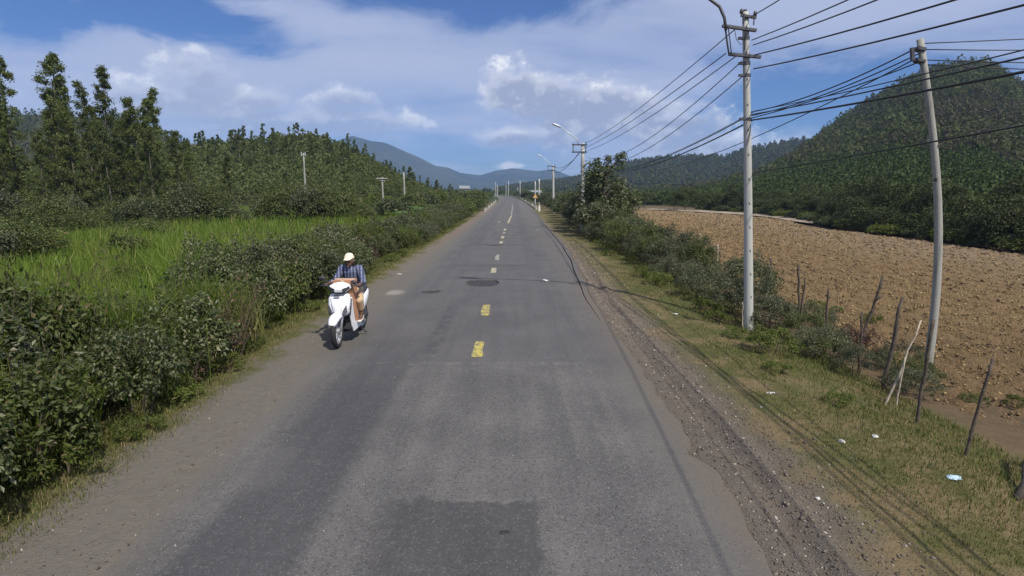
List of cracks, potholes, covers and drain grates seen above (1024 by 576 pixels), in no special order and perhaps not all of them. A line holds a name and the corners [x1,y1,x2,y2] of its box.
pothole [465,279,500,287]
